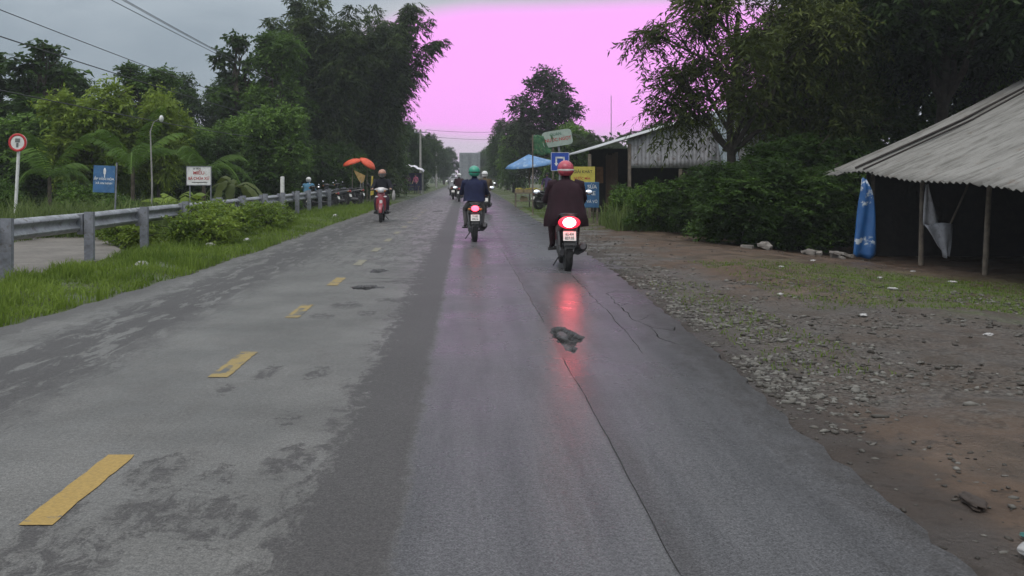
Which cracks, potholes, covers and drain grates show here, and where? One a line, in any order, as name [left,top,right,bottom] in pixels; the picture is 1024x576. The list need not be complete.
crack [571,274,704,351]
crack [501,249,682,576]
pothole [549,327,585,353]
